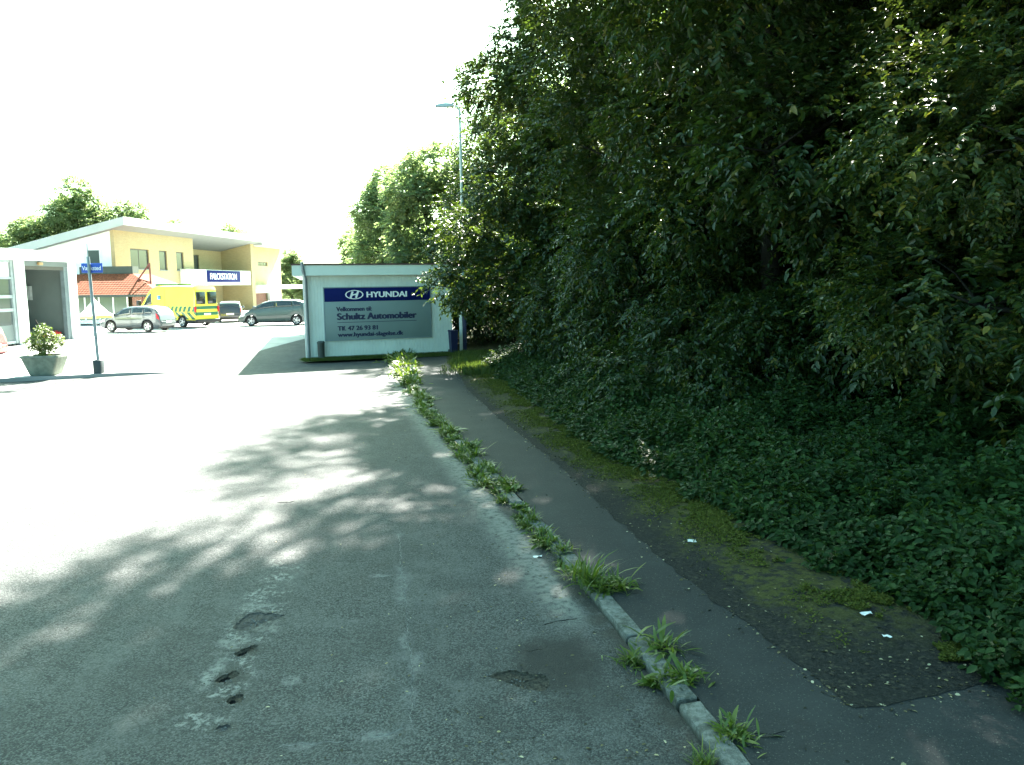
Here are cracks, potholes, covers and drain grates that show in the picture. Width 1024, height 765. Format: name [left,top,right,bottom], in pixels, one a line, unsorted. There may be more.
pothole [217,689,250,708]
pothole [224,645,264,662]
pothole [203,667,246,689]
pothole [227,606,287,640]
pothole [460,664,563,695]
